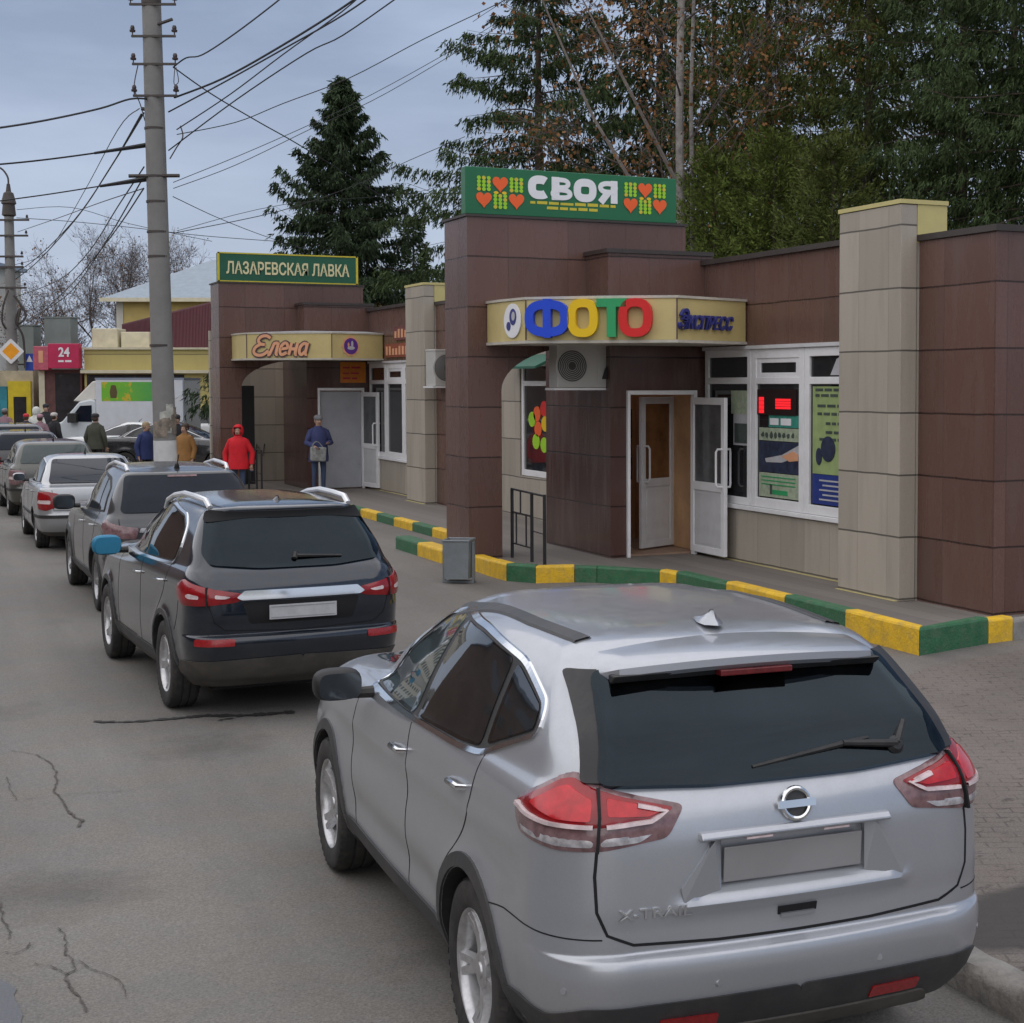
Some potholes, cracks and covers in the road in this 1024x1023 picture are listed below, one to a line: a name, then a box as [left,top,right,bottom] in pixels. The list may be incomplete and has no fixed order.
crack [0,902,127,1012]
crack [6,750,134,827]
